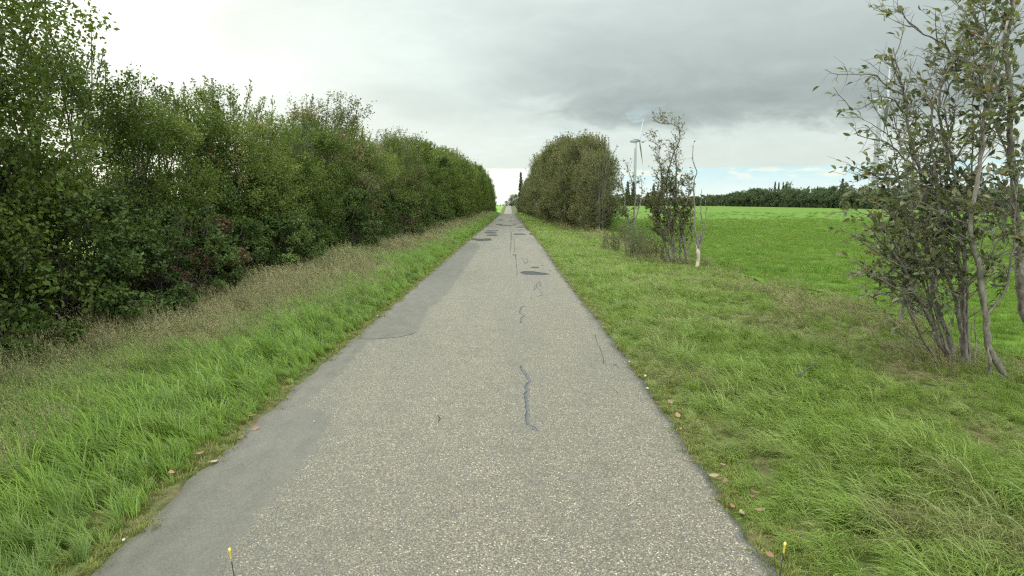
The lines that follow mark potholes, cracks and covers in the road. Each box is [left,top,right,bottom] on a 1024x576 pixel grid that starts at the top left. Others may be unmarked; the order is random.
crack [520,366,538,431]
